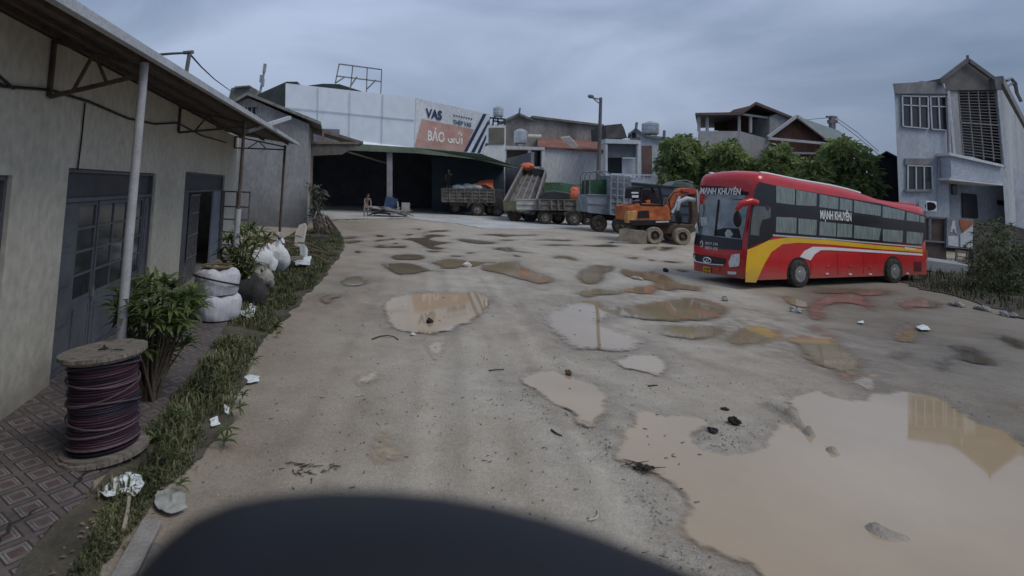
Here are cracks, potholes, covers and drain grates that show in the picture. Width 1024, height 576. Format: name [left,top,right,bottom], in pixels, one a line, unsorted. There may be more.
pothole [543,301,644,351]
pothole [615,298,726,321]
pothole [614,373,1024,576]
pothole [577,265,612,284]
pothole [384,263,432,274]
pothole [806,293,869,319]
pothole [521,371,609,427]
pothole [949,345,993,364]
pothole [481,261,553,283]
pothole [383,293,492,334]
pothole [789,334,863,379]
pothole [727,326,782,345]
